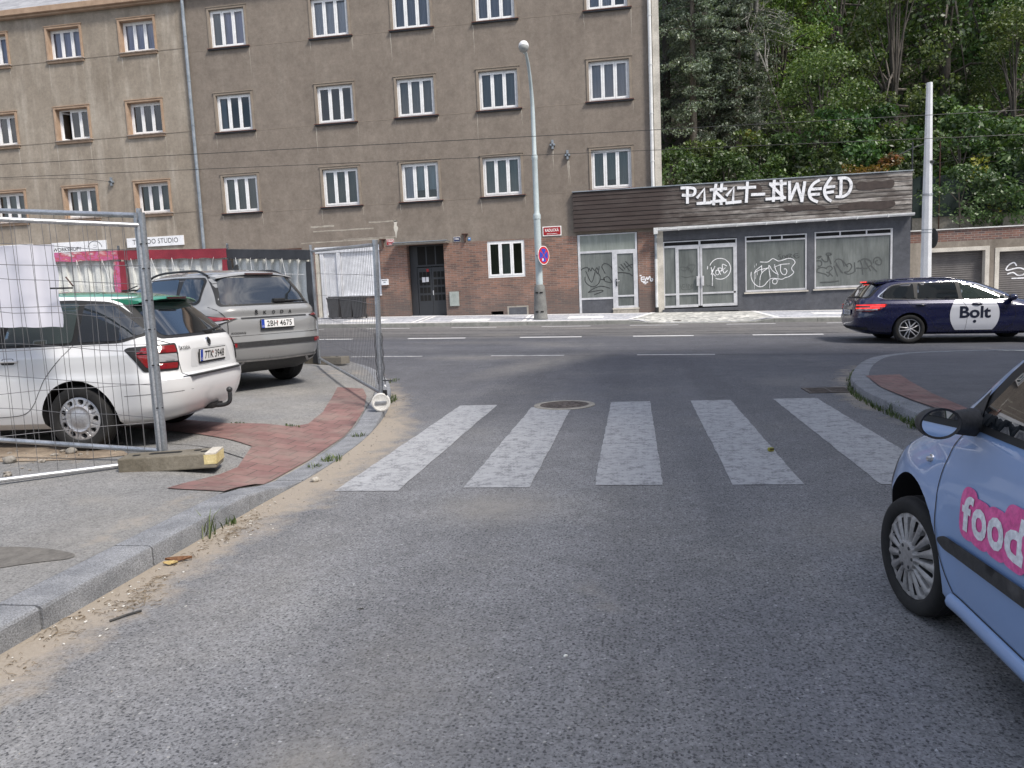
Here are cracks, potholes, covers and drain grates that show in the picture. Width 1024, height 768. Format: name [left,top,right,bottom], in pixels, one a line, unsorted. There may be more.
manhole cover [534,400,595,410]
